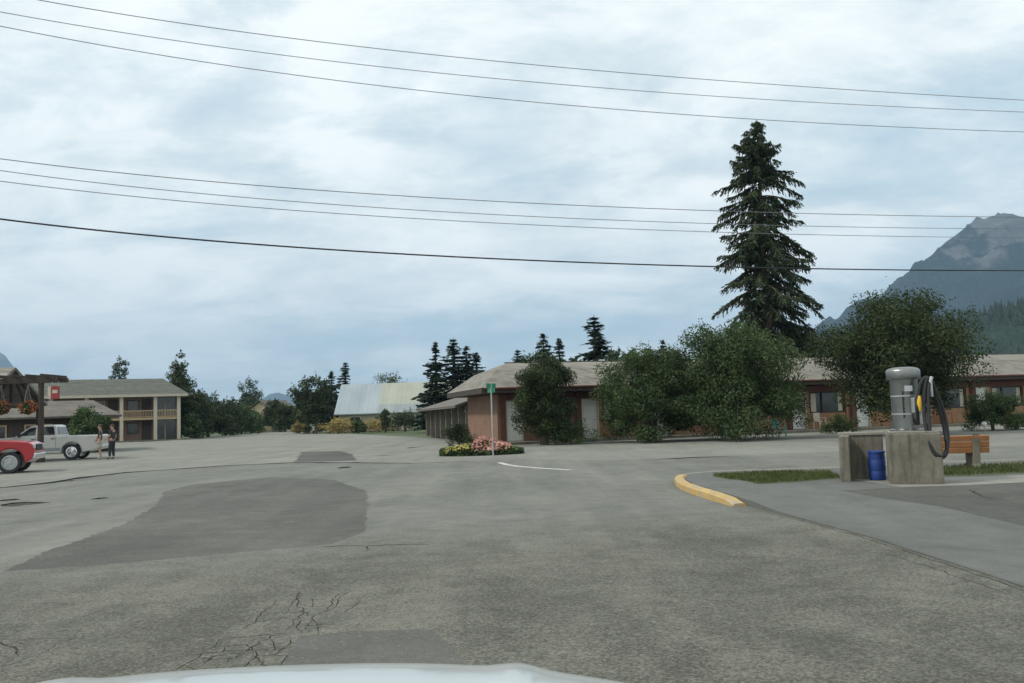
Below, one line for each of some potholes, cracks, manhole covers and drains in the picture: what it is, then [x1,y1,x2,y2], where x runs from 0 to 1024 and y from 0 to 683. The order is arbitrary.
crack [0,629,79,662]
crack [177,591,358,670]
